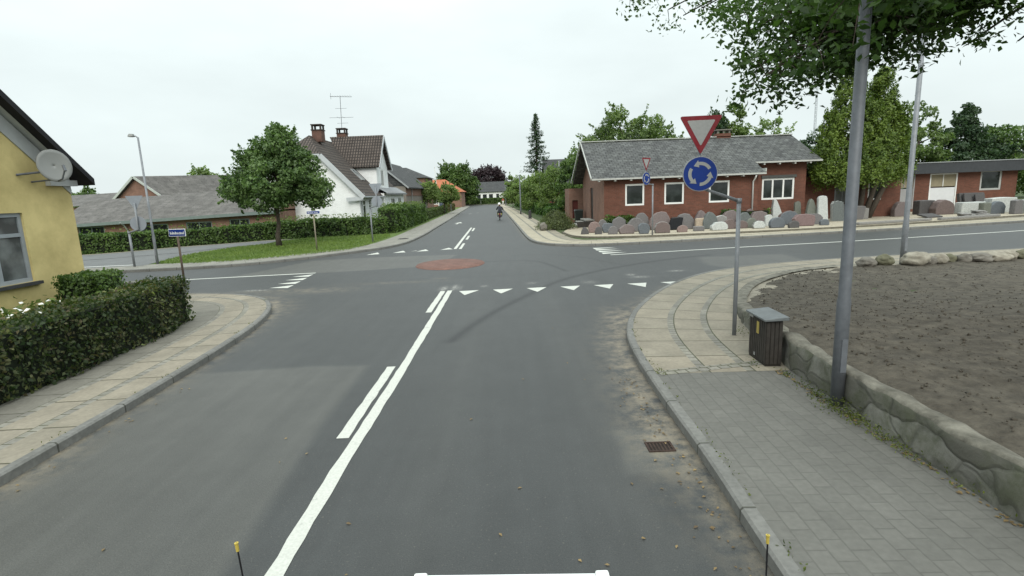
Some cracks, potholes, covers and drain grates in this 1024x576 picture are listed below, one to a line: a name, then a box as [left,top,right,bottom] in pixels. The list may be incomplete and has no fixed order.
drain grate [644,441,676,452]
